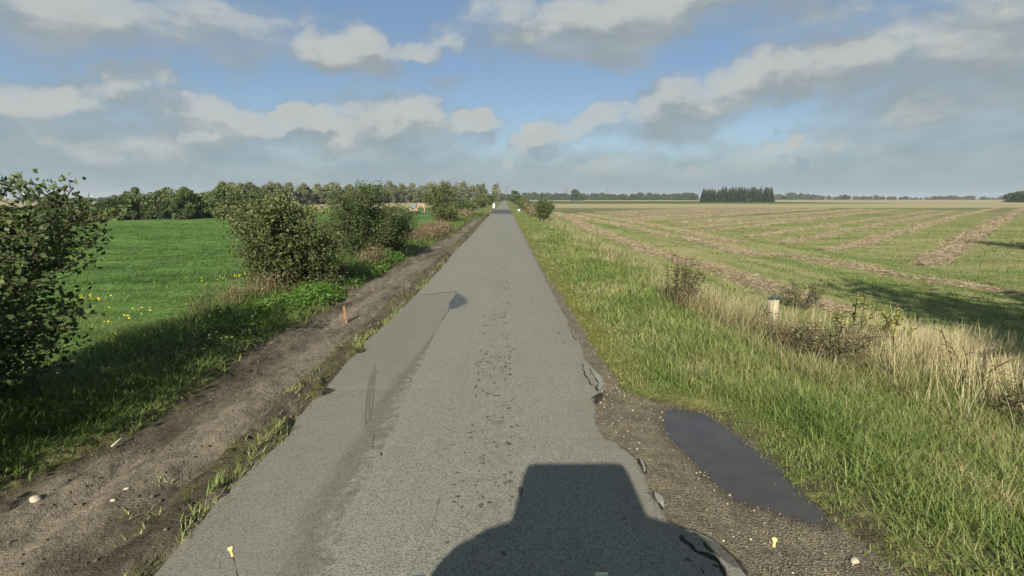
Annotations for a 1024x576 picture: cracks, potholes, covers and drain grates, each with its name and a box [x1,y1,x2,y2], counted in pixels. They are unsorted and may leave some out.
crack [581,363,599,391]
crack [679,532,748,576]
